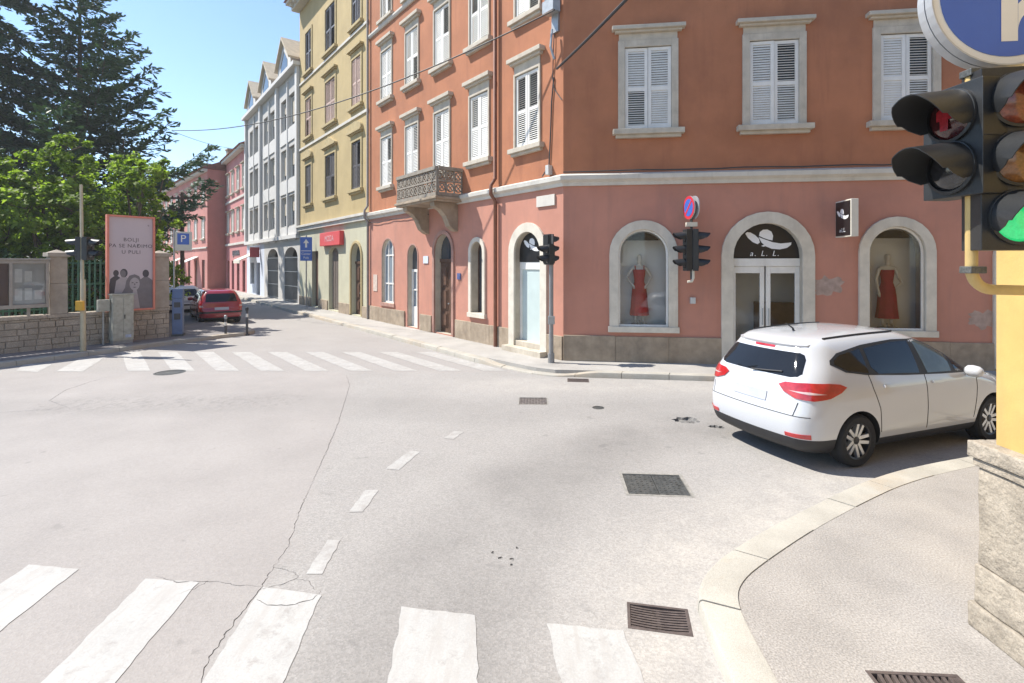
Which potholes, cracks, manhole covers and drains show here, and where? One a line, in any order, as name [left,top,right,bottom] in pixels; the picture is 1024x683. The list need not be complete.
drain grate [865,670,965,683]
manhole cover [619,472,695,497]
pothole [672,417,725,429]
drain grate [627,602,693,637]
